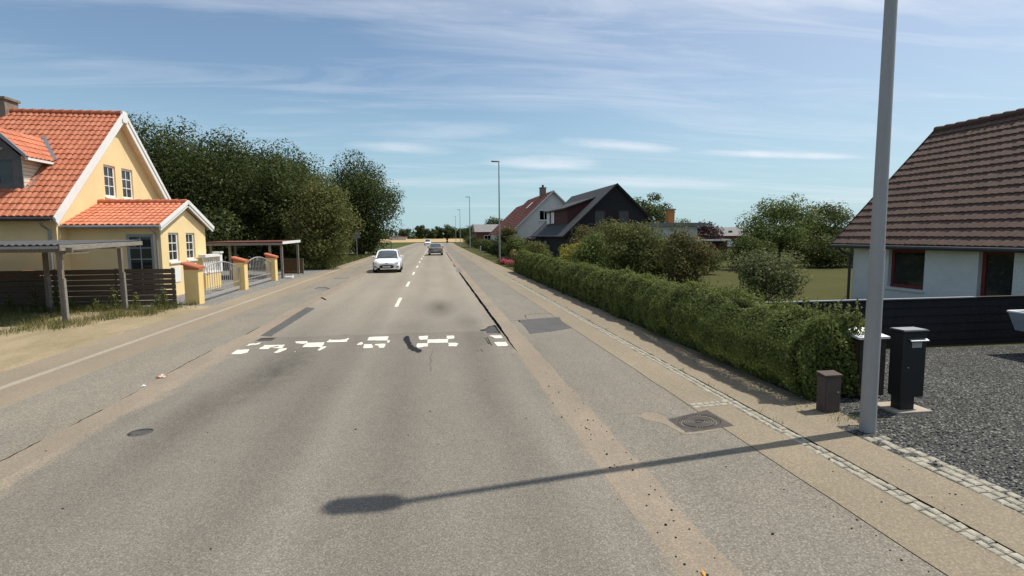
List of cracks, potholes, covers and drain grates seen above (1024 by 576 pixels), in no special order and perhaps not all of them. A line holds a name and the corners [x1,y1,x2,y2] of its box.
manhole cover [668,410,734,432]
manhole cover [126,428,154,437]
